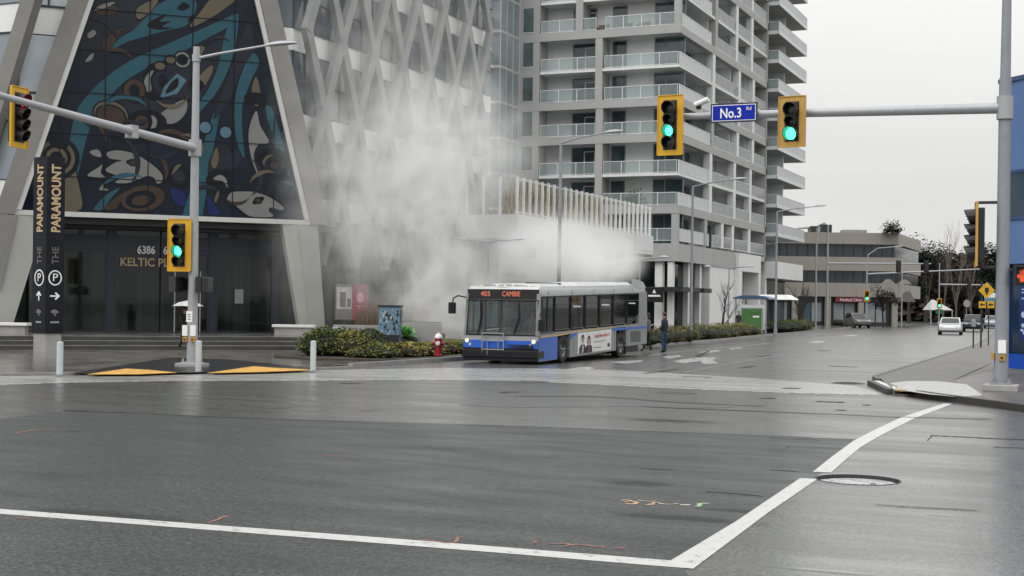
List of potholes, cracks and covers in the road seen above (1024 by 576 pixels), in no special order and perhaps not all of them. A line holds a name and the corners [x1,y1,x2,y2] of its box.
manhole cover [814,474,902,485]
